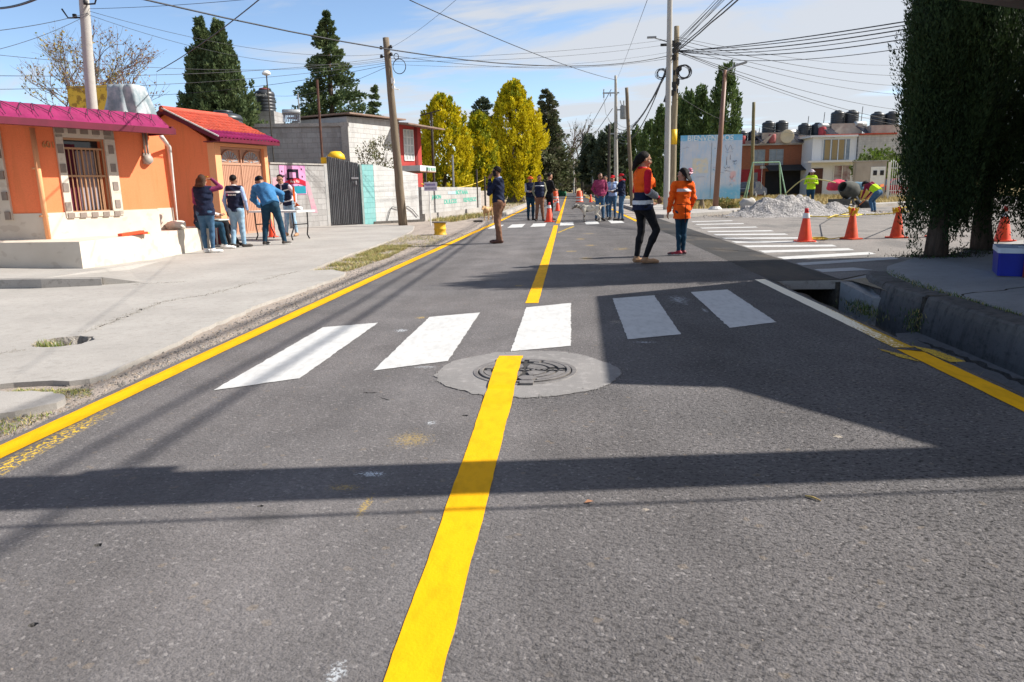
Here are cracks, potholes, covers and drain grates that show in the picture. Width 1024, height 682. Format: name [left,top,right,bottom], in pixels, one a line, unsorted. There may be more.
manhole cover [431,350,628,398]
pothole [31,336,94,347]
